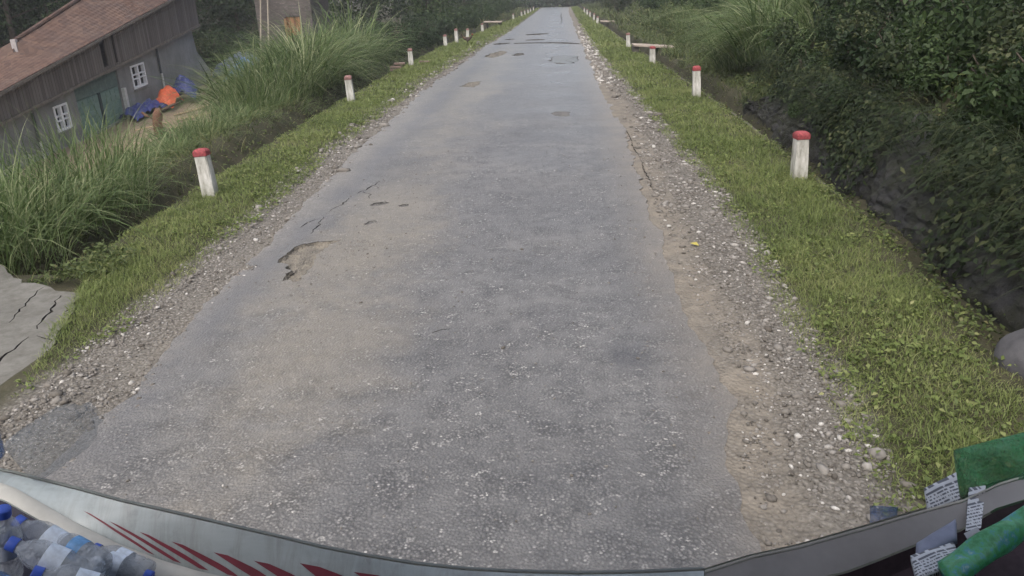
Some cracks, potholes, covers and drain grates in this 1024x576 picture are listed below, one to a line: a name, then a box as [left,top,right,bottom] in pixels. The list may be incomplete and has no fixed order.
pothole [278,241,338,282]
crack [301,181,380,233]
crack [0,287,68,361]
